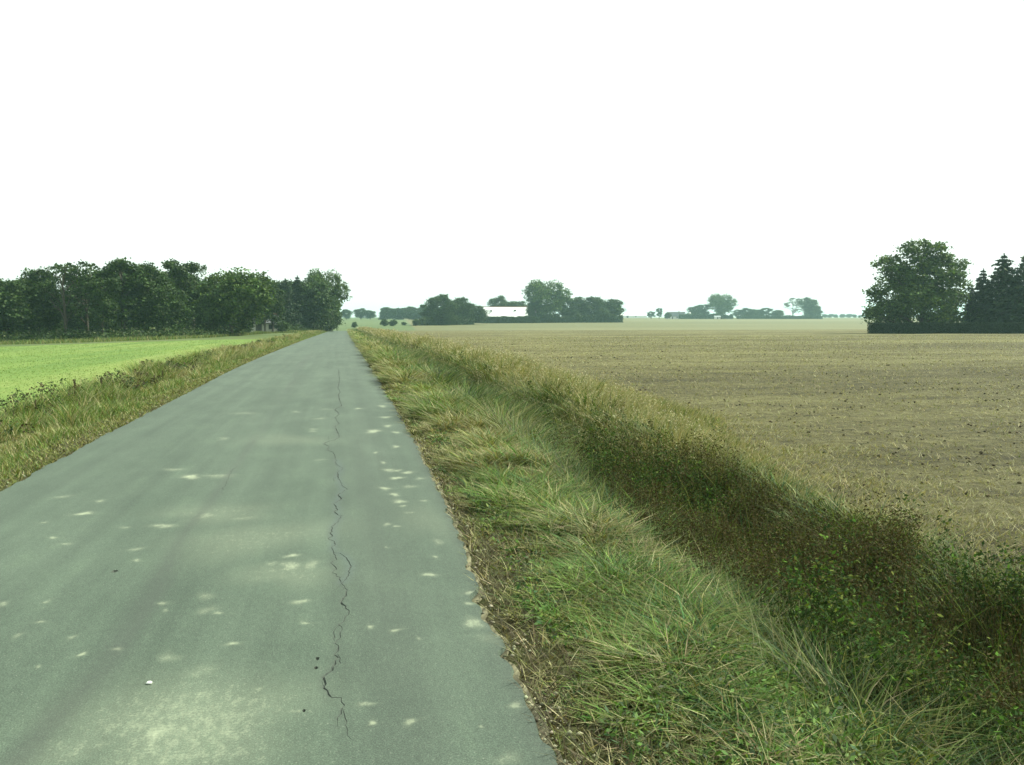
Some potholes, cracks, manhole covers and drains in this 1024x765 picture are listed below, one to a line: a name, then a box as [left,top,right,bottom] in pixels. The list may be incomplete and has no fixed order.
crack [322,370,351,739]
